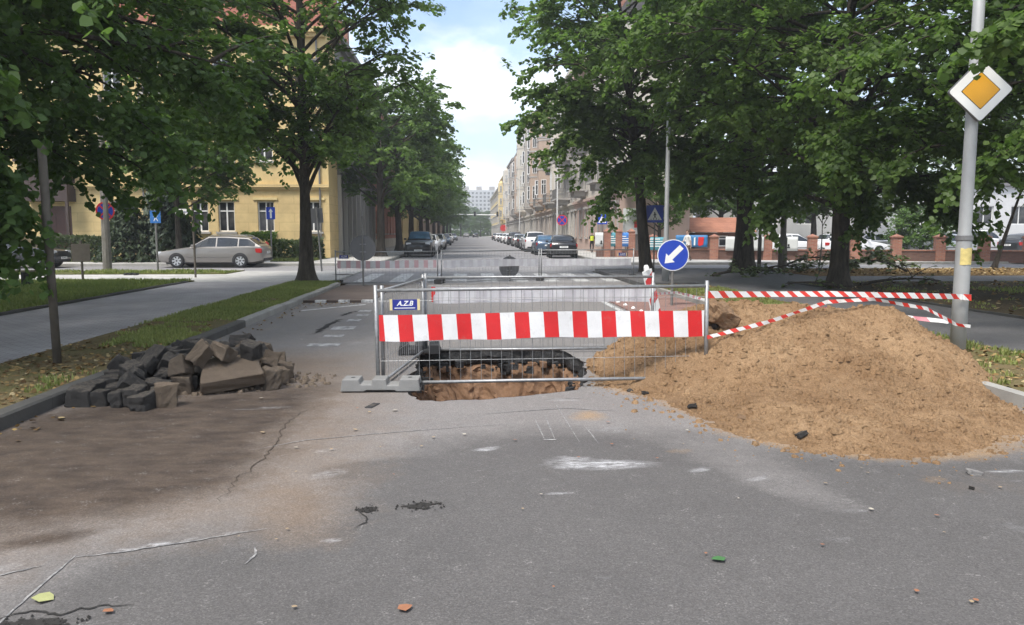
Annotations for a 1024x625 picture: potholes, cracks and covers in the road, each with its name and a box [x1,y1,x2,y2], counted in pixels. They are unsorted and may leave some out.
pothole [395,500,445,511]
pothole [407,350,588,402]
crack [1,604,131,618]
crack [217,409,308,502]
